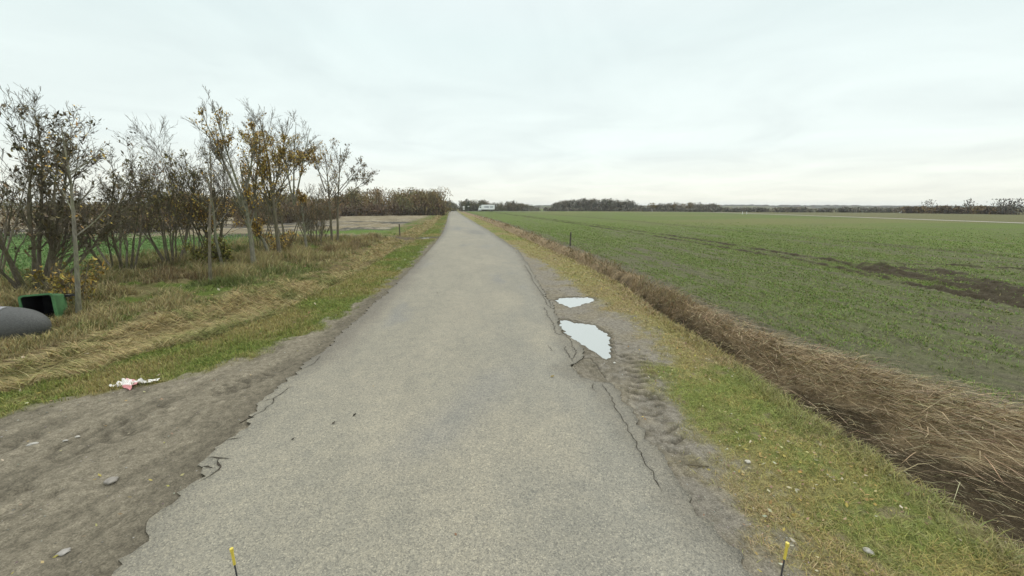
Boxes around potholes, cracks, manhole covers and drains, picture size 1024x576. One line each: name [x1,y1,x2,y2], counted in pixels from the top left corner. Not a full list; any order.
pothole [557,318,616,362]
crack [205,391,285,476]
